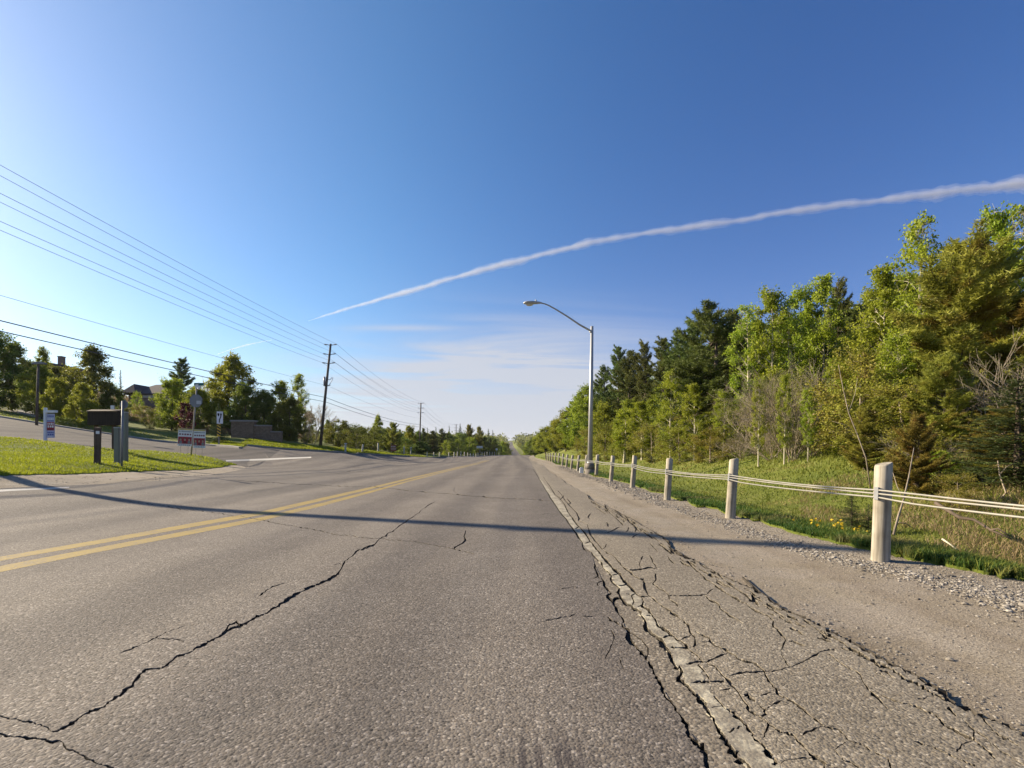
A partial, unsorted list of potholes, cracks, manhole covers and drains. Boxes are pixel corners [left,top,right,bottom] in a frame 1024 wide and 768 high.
crack [0,503,472,767]
crack [239,470,1024,768]
